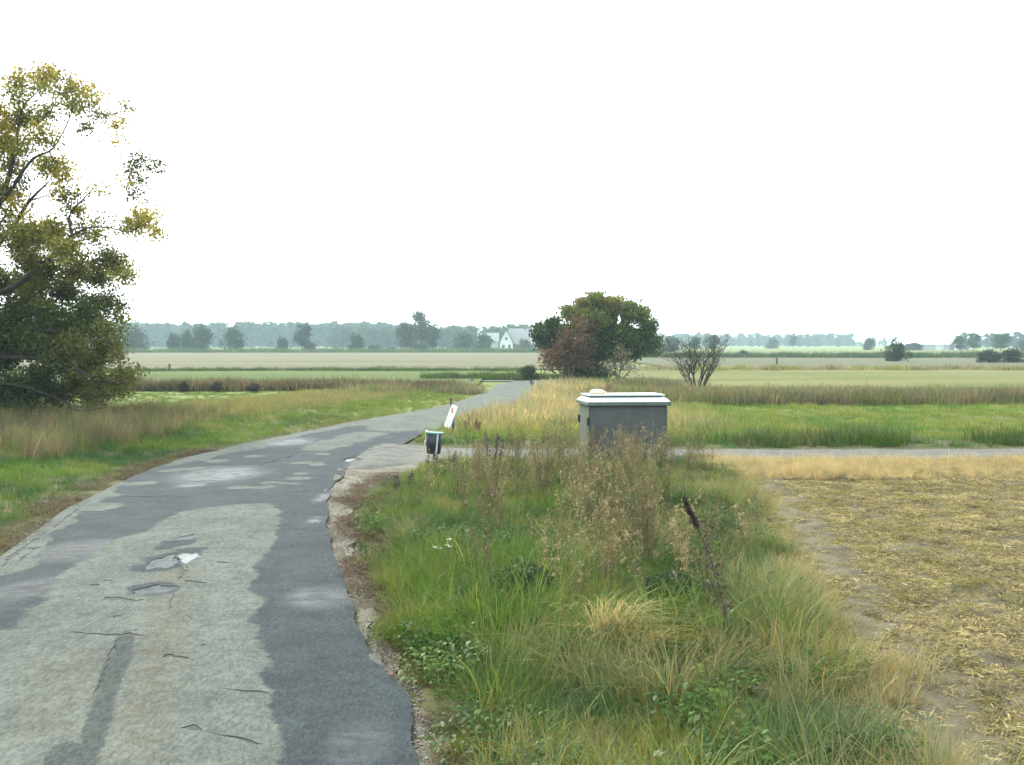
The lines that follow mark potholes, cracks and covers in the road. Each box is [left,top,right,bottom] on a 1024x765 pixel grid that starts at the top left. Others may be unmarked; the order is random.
crack [169,565,206,620]
pothole [132,584,180,594]
crack [2,509,79,567]
crack [74,580,148,696]
crack [163,644,206,659]
crack [181,724,259,744]
pothole [145,554,179,570]
